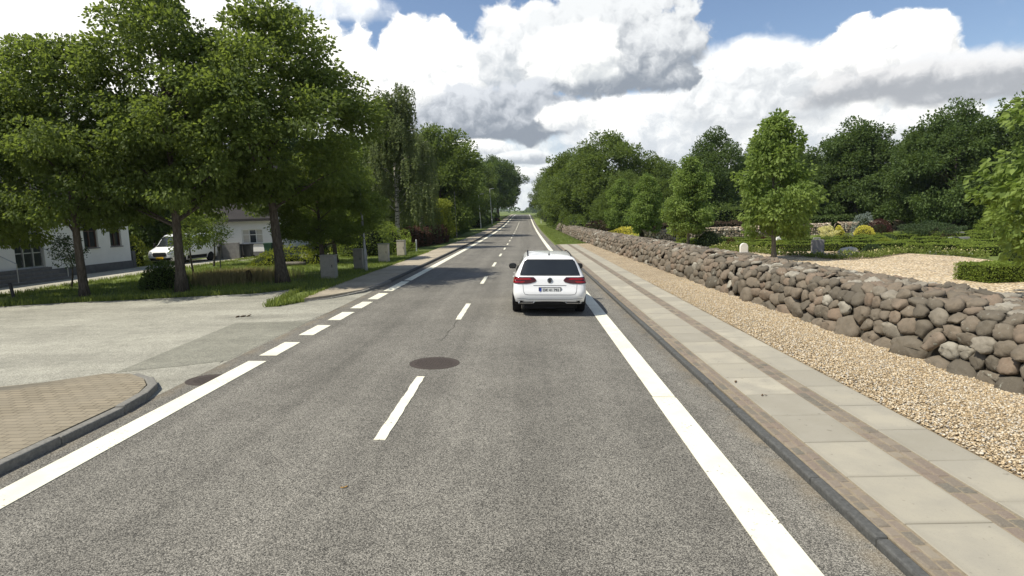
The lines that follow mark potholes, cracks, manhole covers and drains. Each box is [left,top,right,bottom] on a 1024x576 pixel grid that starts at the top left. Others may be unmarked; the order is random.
manhole cover [409,357,460,370]
